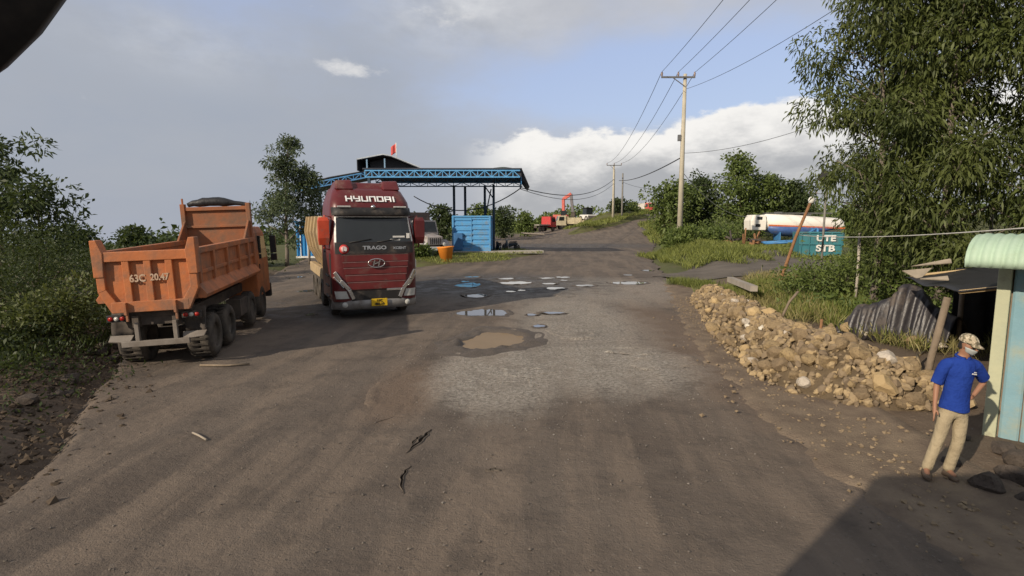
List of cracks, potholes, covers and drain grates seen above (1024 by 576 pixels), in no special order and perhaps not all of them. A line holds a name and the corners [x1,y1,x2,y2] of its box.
crack [399,429,432,493]
pothole [434,326,548,358]
pothole [447,308,514,318]
